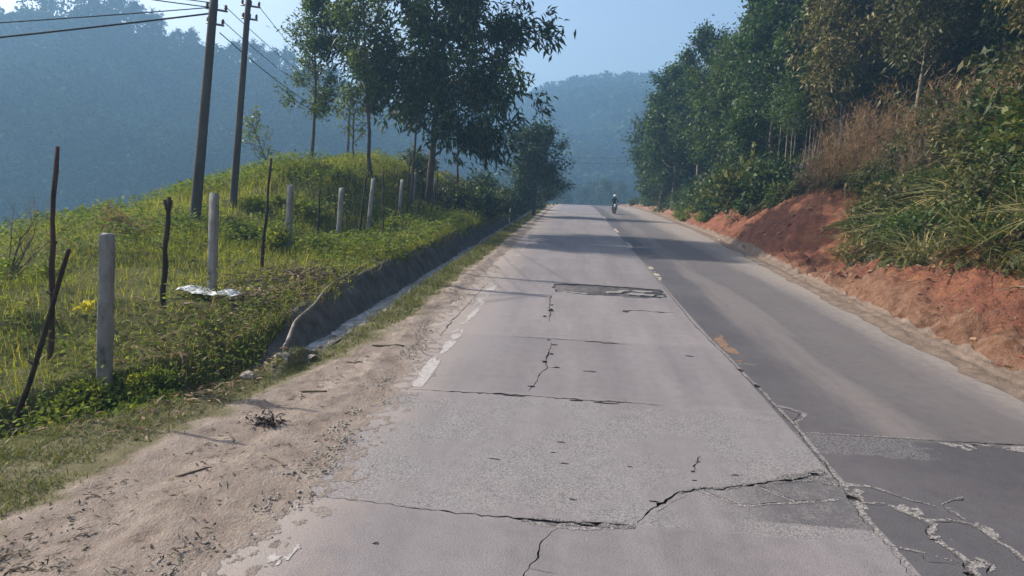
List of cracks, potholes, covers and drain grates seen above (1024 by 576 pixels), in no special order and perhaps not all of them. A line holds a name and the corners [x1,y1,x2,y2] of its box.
crack [623,262,1024,576]
crack [523,527,559,576]
crack [517,294,625,392]
